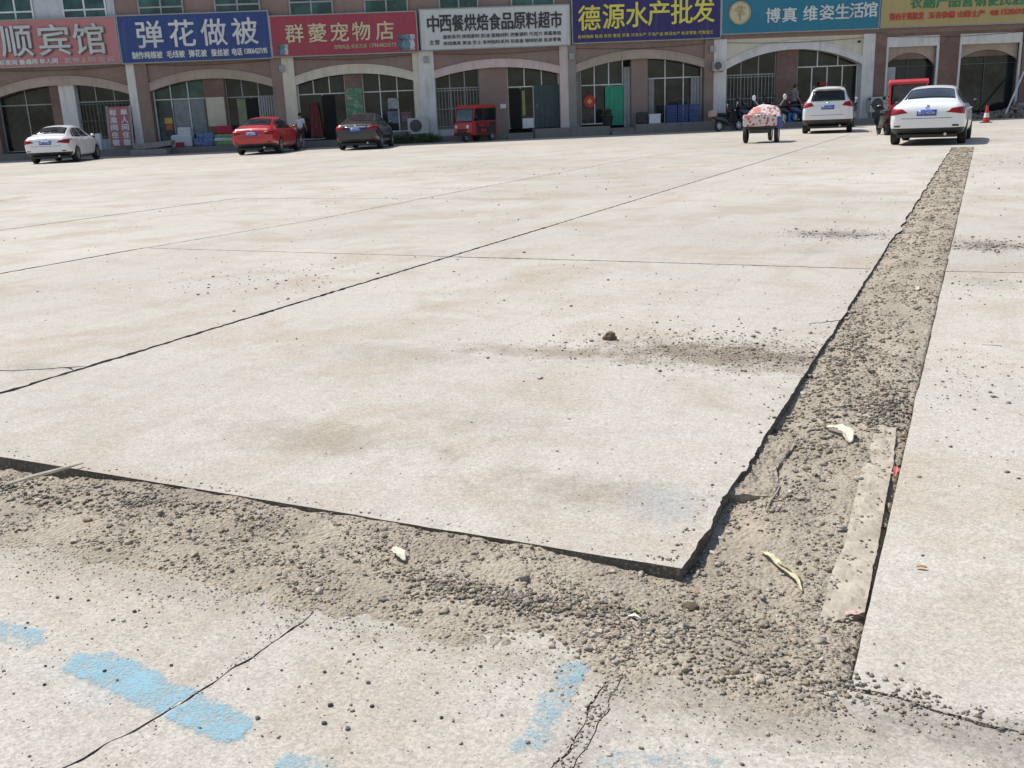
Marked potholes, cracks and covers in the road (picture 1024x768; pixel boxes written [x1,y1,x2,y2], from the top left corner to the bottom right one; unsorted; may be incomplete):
crack [63,614,312,768]
